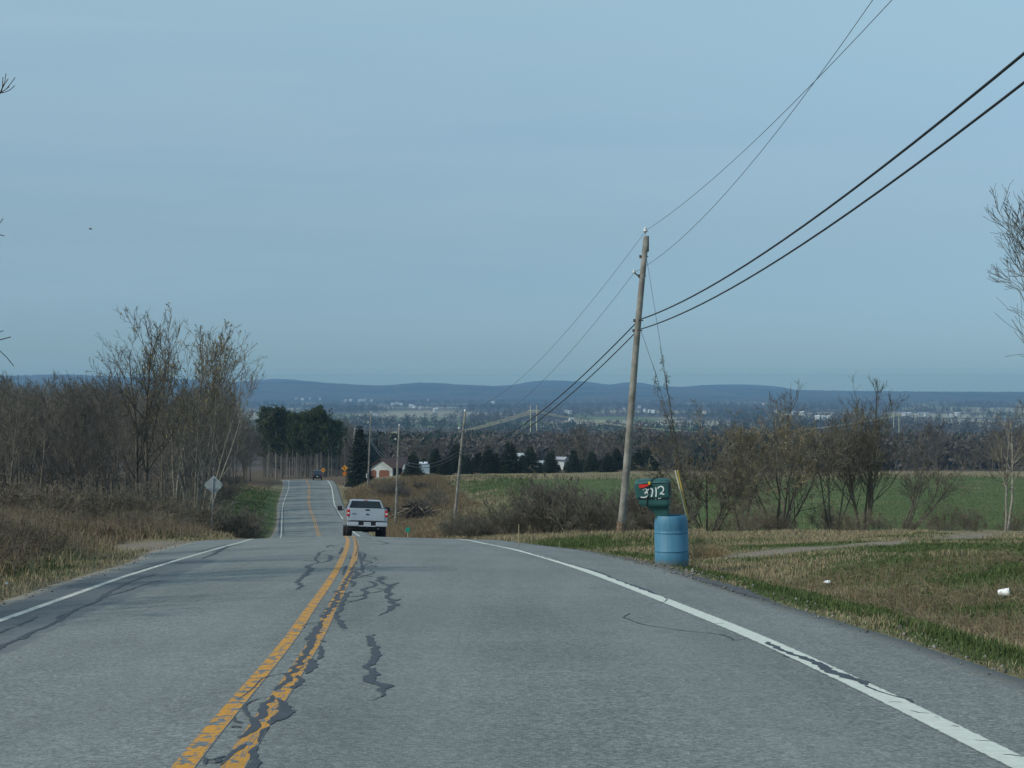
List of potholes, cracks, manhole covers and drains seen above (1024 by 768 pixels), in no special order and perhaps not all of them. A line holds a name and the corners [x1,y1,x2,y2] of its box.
crack [623,613,740,640]
